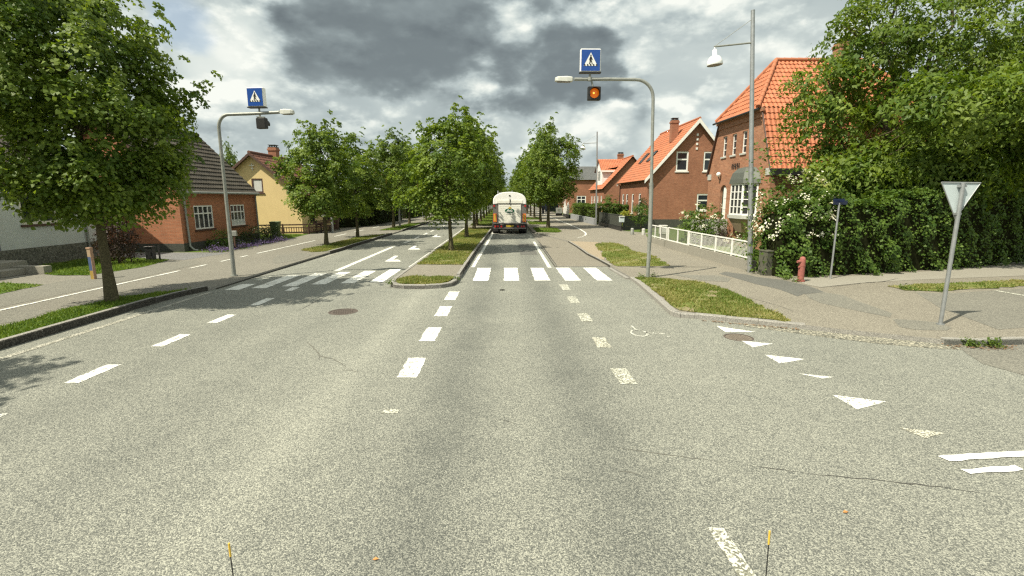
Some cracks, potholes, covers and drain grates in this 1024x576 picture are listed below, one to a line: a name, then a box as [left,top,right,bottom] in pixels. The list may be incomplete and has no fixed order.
manhole cover [723,333,754,341]
crack [749,465,980,493]
